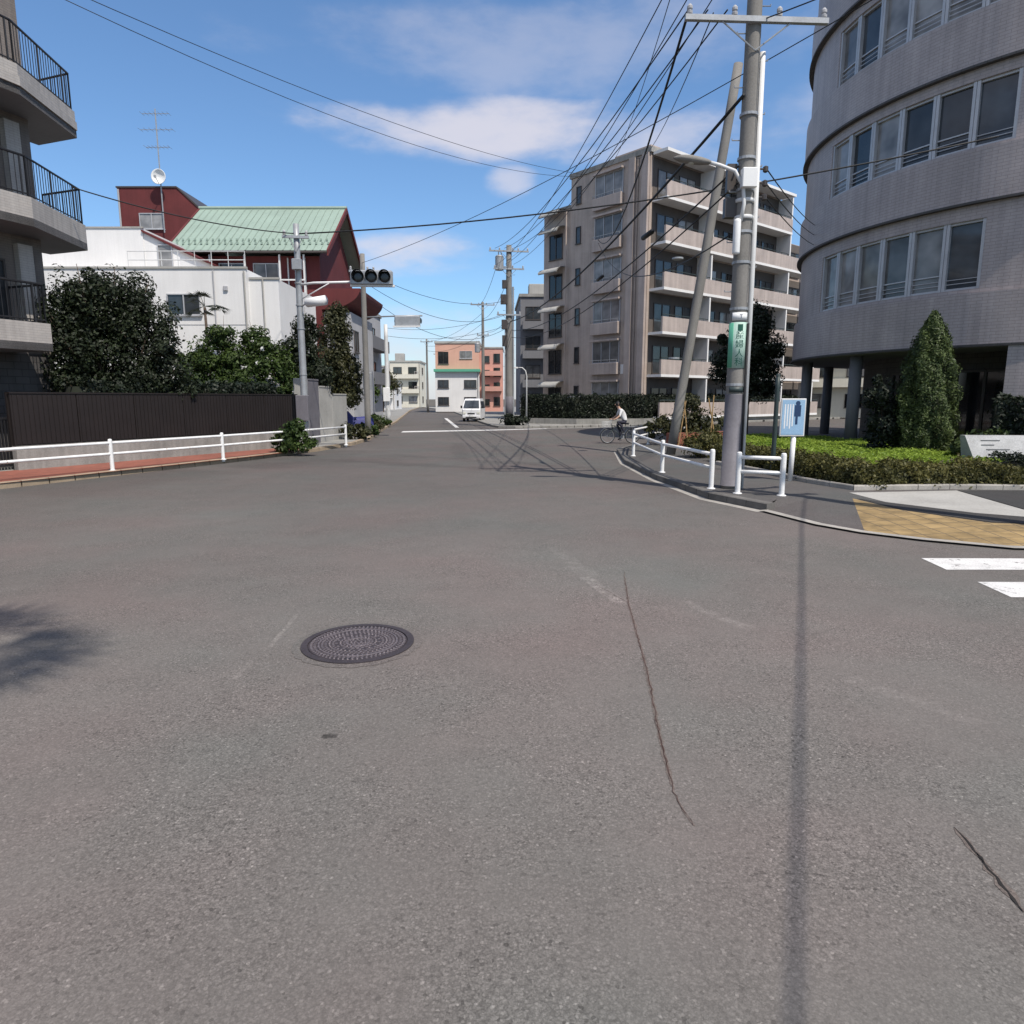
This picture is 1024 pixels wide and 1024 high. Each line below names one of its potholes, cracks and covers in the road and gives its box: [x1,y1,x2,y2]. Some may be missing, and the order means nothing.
crack [954,827,1024,912]
crack [599,572,695,826]
manhole cover [291,622,423,668]
